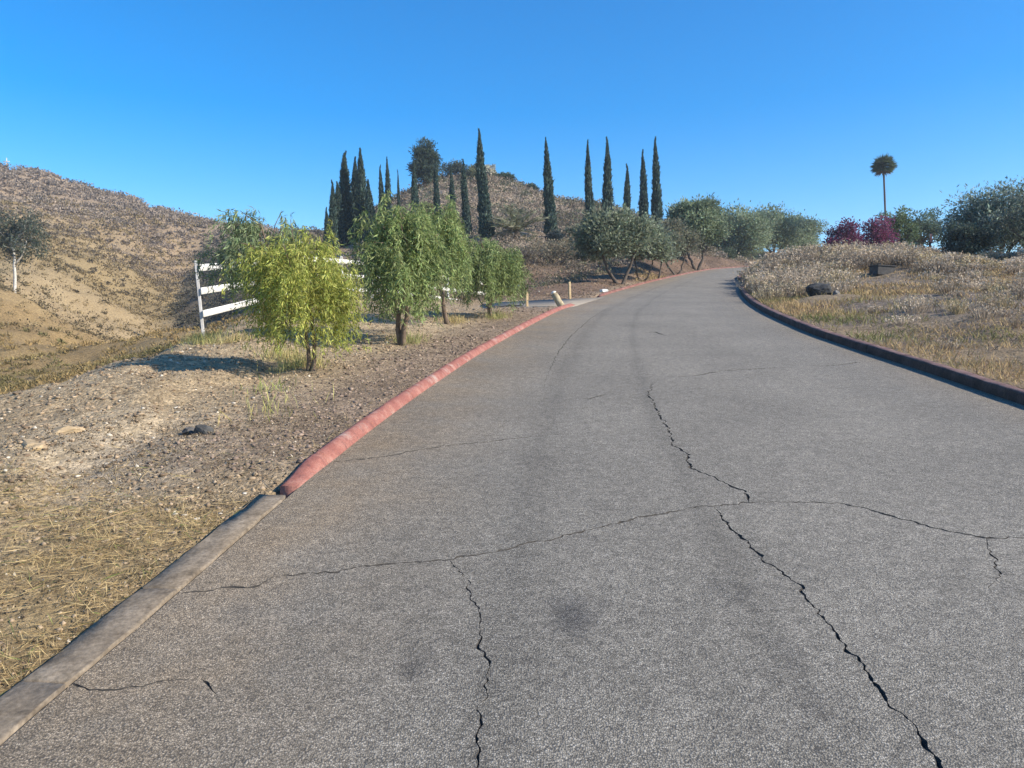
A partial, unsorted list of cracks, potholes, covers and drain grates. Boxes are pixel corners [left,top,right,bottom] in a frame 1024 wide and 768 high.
crack [74,679,183,691]
crack [178,383,1019,768]
